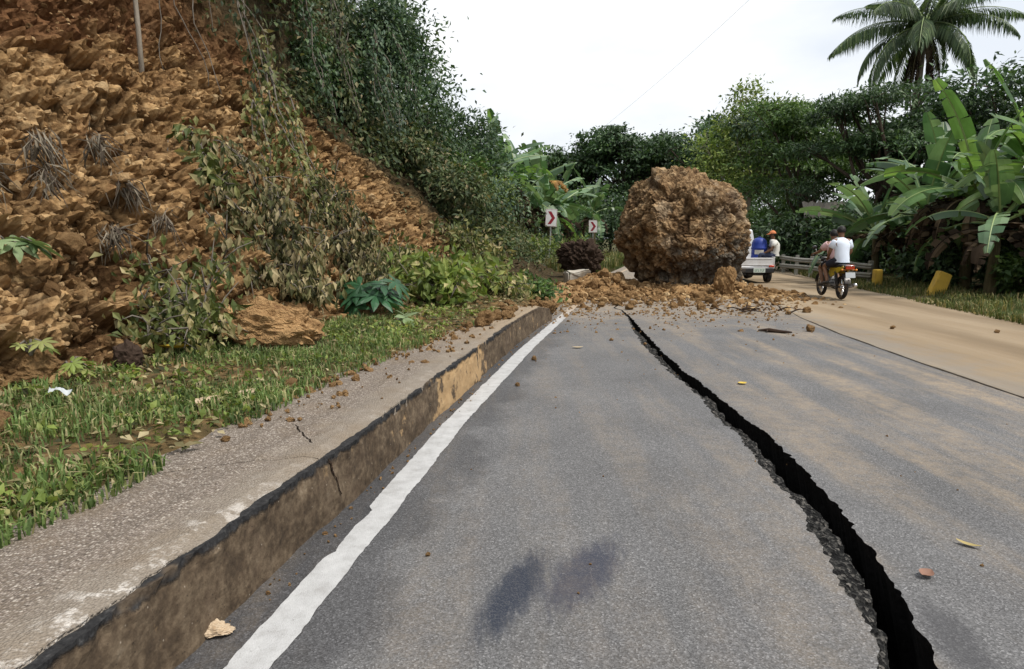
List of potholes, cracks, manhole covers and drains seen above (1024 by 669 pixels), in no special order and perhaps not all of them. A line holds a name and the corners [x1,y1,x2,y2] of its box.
crack [610,303,1024,669]
